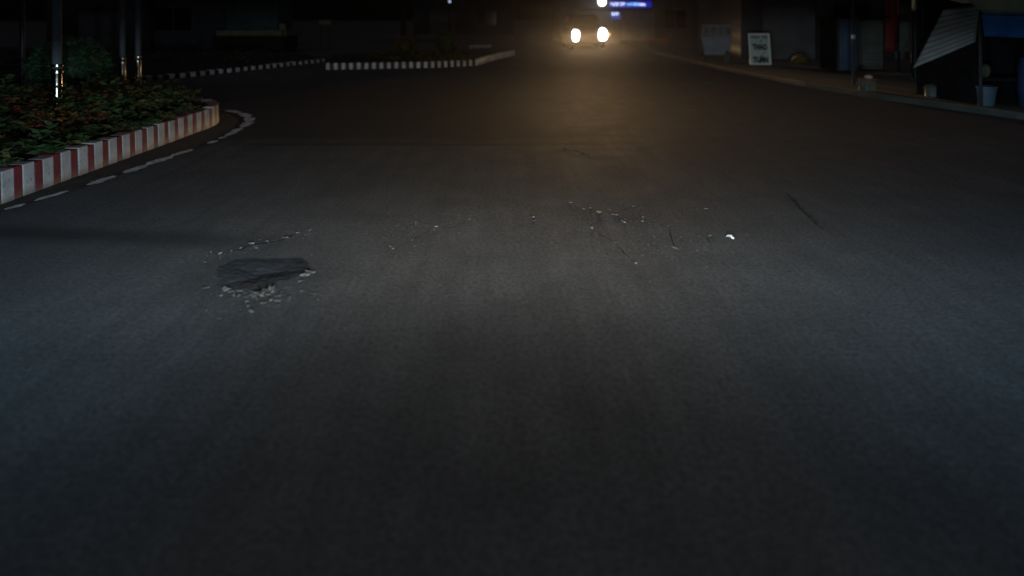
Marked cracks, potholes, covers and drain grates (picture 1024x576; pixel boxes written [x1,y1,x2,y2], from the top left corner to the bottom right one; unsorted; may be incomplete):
crack [786,192,824,230]
pothole [175,254,331,319]
crack [549,191,747,273]
